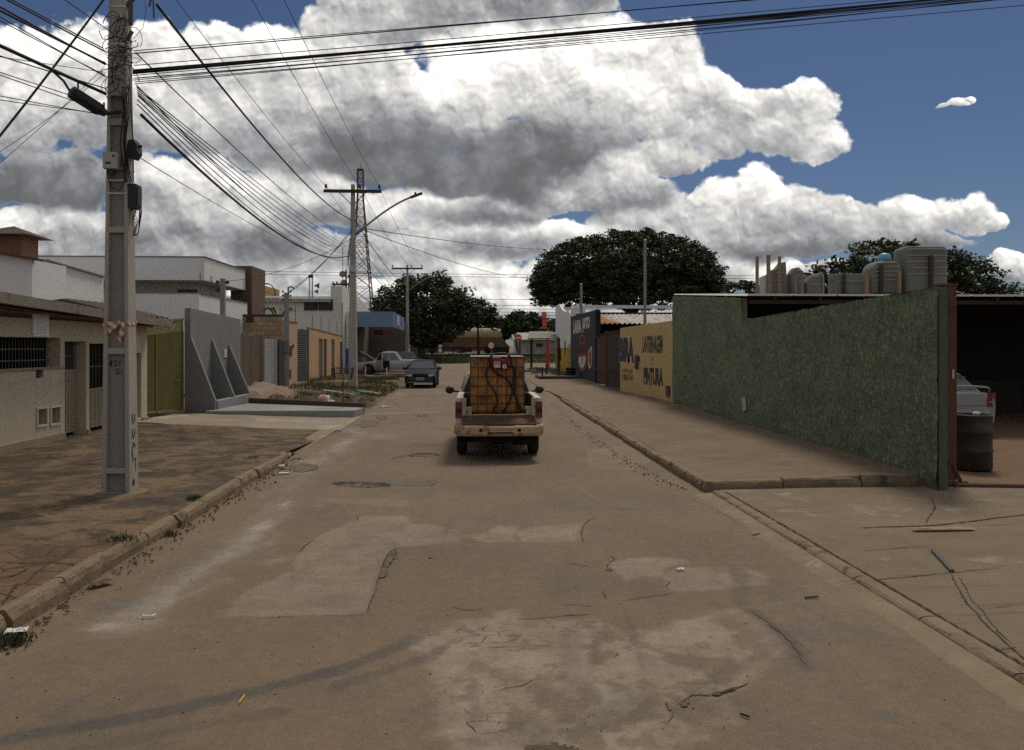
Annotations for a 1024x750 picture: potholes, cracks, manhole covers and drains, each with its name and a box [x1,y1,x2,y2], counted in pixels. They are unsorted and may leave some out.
crack [366,546,414,614]
crack [452,606,547,652]
crack [751,610,806,664]
crack [951,572,1024,659]
crack [664,682,749,722]
